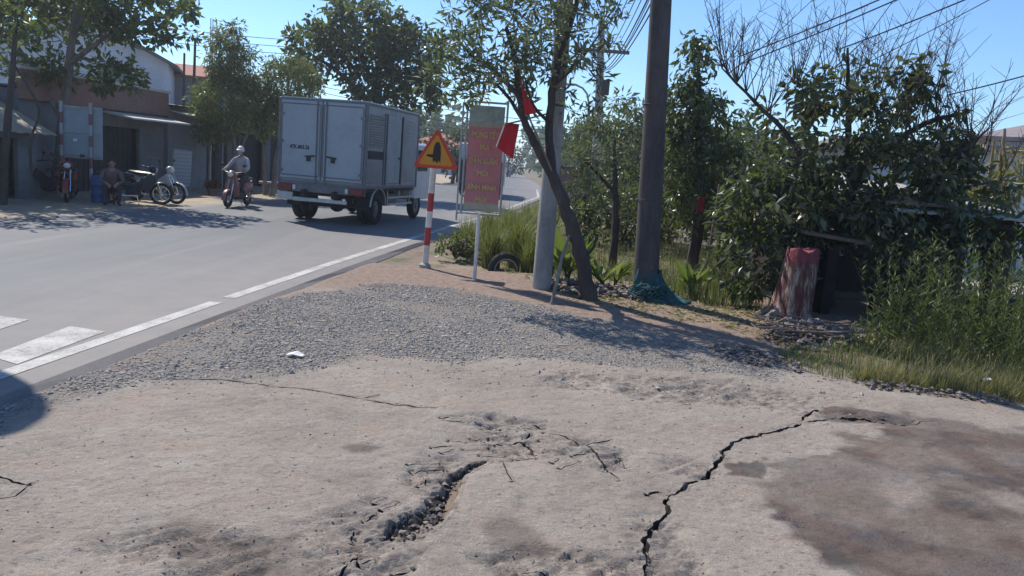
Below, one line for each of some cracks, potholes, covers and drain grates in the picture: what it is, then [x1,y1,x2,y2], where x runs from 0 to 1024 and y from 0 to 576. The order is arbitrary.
crack [0,473,34,501]
pothole [361,459,494,551]
crack [135,378,936,576]
